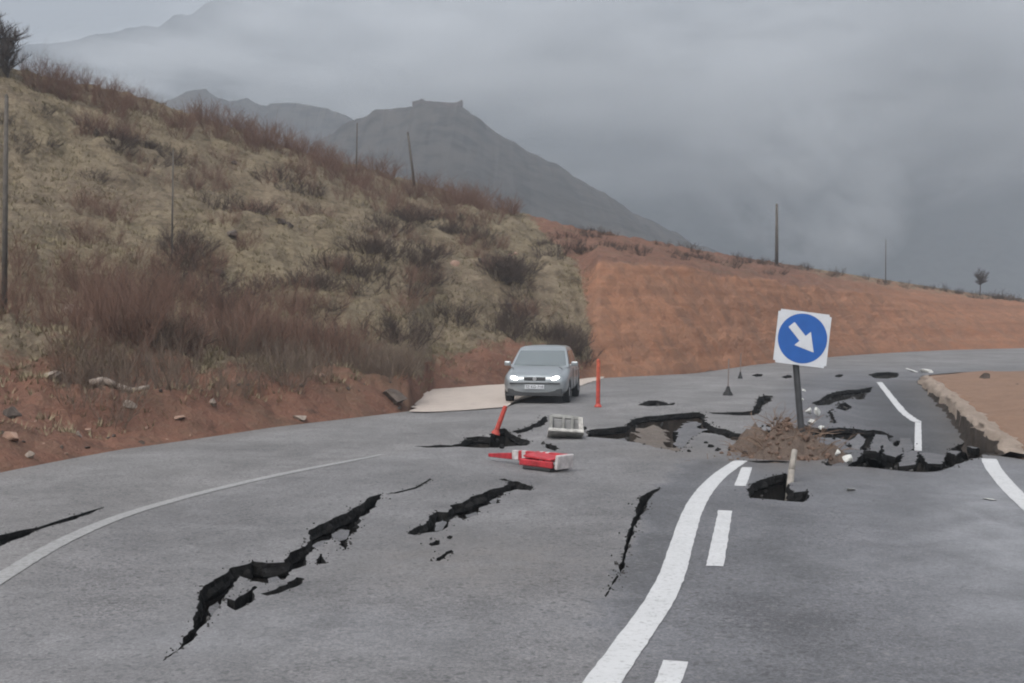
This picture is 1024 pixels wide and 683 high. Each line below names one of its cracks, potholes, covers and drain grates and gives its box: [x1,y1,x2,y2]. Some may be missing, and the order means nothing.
crack [163,478,536,661]
pothole [744,473,813,502]
crack [603,487,660,597]
crack [0,507,104,546]
crack [804,372,900,453]
crack [709,394,773,416]
crack [417,415,559,451]
